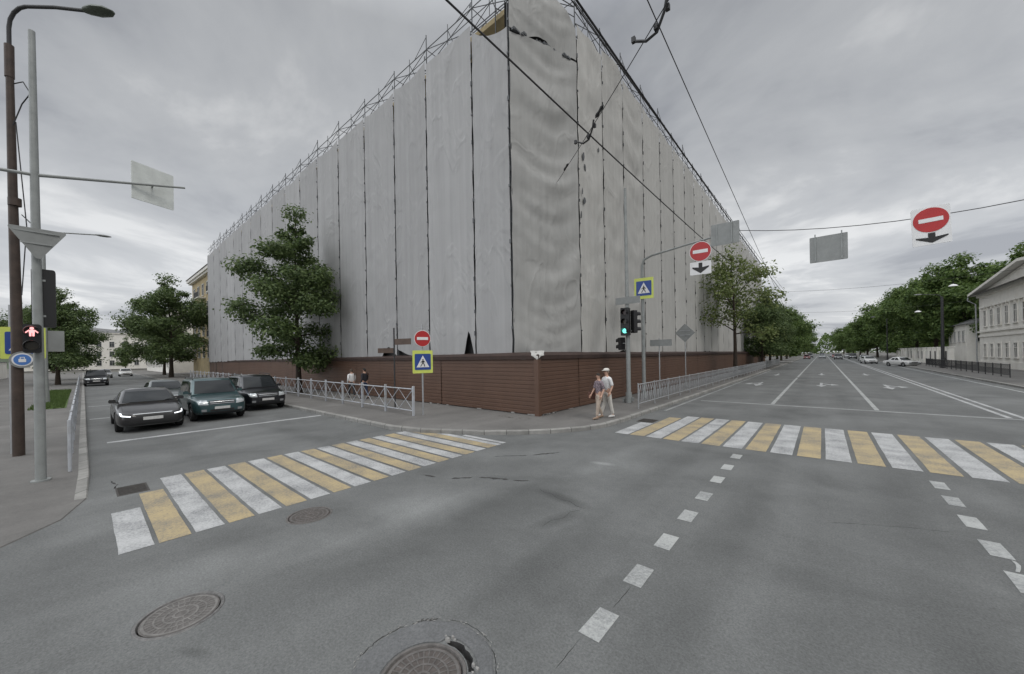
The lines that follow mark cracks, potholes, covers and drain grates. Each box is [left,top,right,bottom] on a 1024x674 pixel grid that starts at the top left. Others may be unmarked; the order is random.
manhole cover [286,506,332,525]
crack [425,475,582,527]
manhole cover [381,643,467,674]
drain grate [115,482,150,497]
crack [360,618,497,674]
manhole cover [131,591,225,641]
